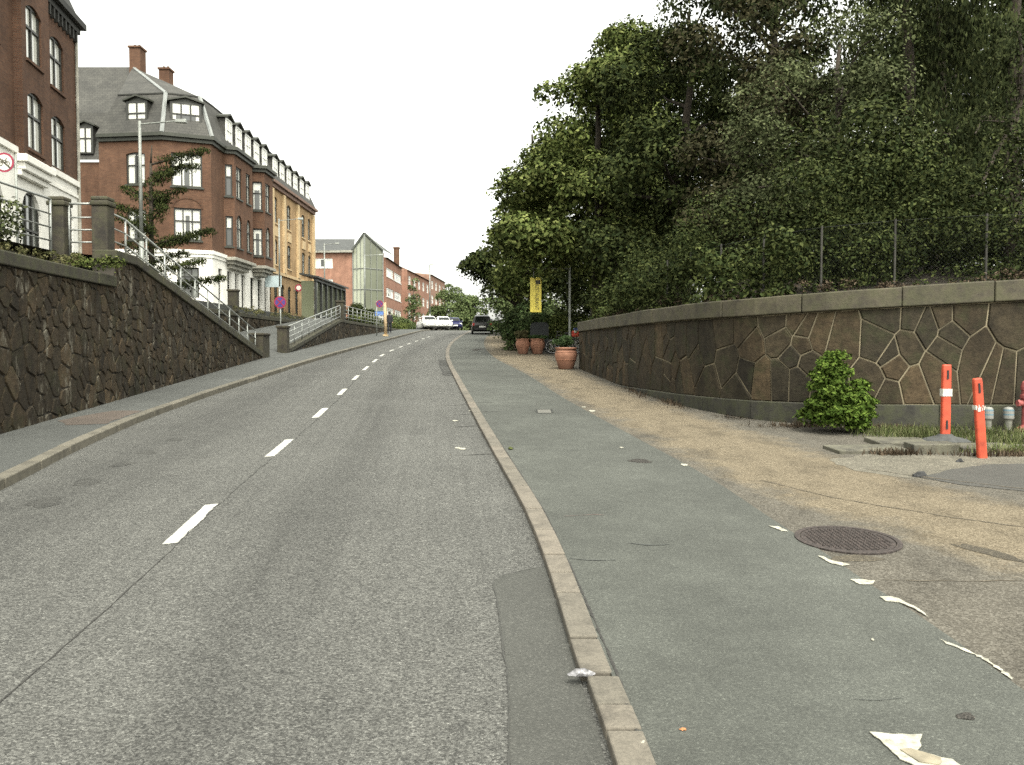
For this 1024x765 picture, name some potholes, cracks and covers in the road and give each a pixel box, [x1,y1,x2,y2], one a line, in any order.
manhole cover [794,526,903,555]
pothole [956,712,975,720]
